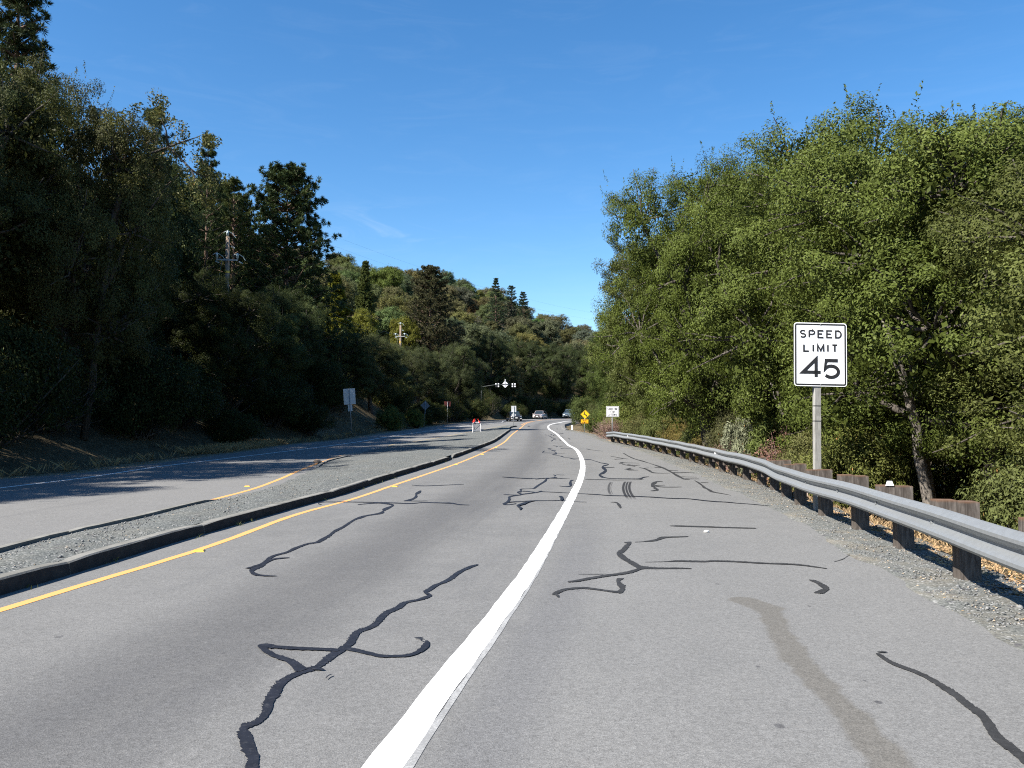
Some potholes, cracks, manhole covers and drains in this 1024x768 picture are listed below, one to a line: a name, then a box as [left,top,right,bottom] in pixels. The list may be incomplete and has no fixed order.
crack [542,424,649,480]
